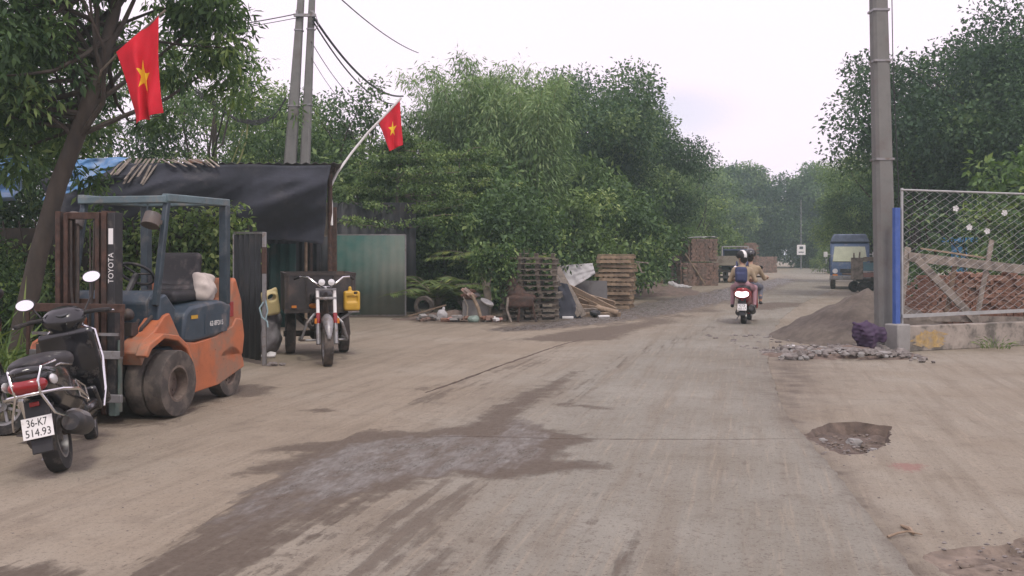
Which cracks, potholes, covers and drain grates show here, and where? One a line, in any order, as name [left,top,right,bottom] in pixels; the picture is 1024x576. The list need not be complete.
pothole [923,537,1024,576]
pothole [804,422,892,455]
crack [425,339,583,393]
